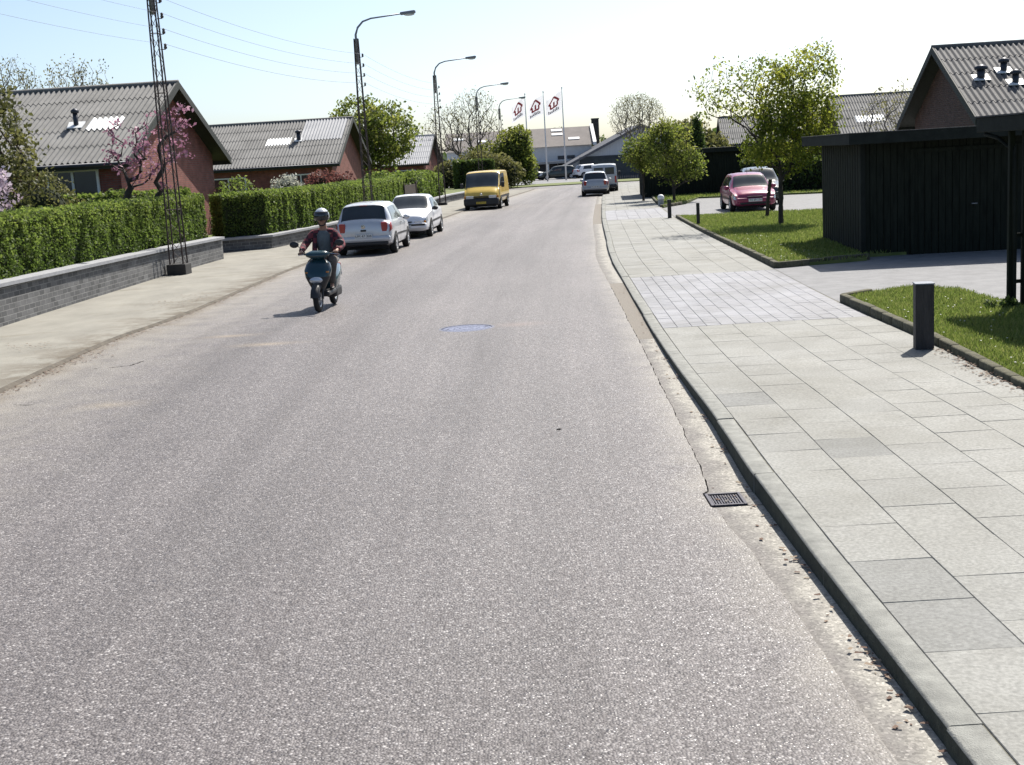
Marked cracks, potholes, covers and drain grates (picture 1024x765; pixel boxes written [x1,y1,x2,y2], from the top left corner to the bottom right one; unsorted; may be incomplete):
manhole cover [439,324,495,332]
drain grate [704,492,748,508]
